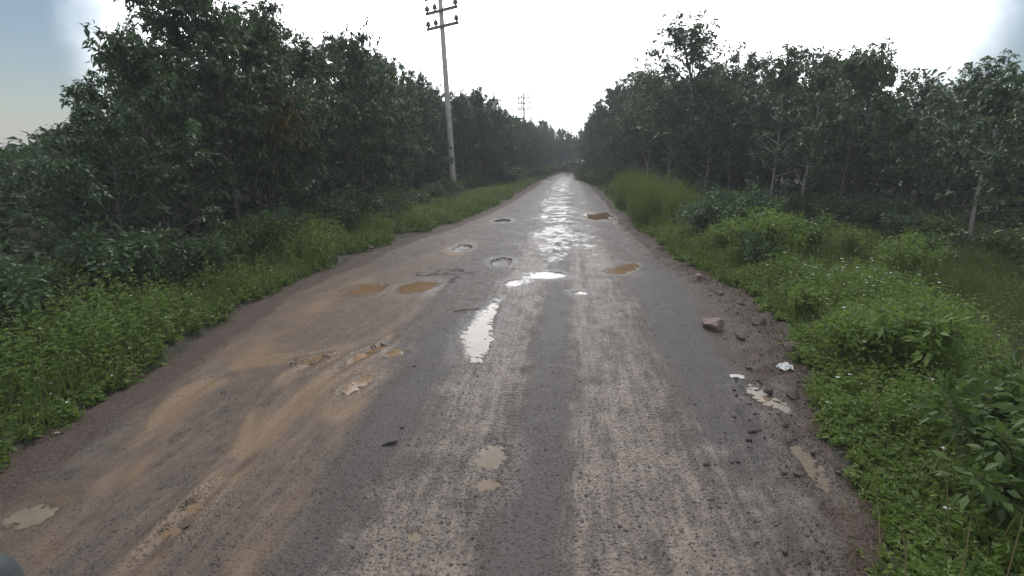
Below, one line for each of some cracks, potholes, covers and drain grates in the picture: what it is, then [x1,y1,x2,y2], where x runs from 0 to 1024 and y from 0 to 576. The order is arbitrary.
pothole [486,256,516,267]
pothole [499,278,529,288]
pothole [453,299,506,369]
pothole [335,282,392,297]
pothole [387,279,448,296]
pothole [329,342,390,373]
pothole [521,271,571,280]
pothole [732,379,808,419]
pothole [463,469,513,499]
pothole [373,345,412,359]
pothole [597,262,646,276]
pothole [777,438,851,496]
